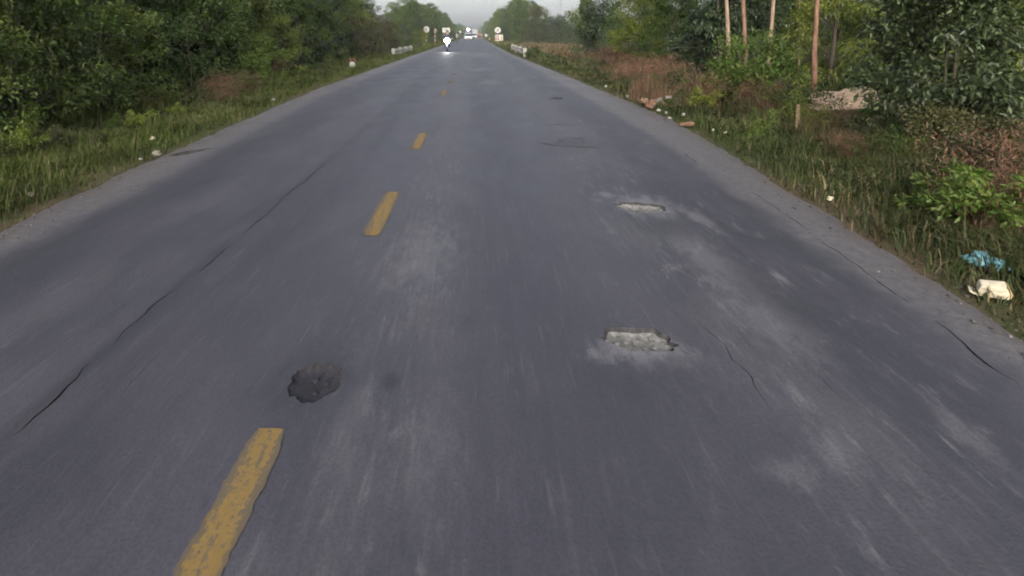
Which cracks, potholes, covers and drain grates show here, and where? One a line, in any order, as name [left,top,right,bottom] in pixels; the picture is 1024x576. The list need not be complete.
pothole [613,202,667,213]
pothole [287,362,342,403]
pothole [601,327,679,352]
crack [7,167,321,440]
crack [705,328,851,421]
